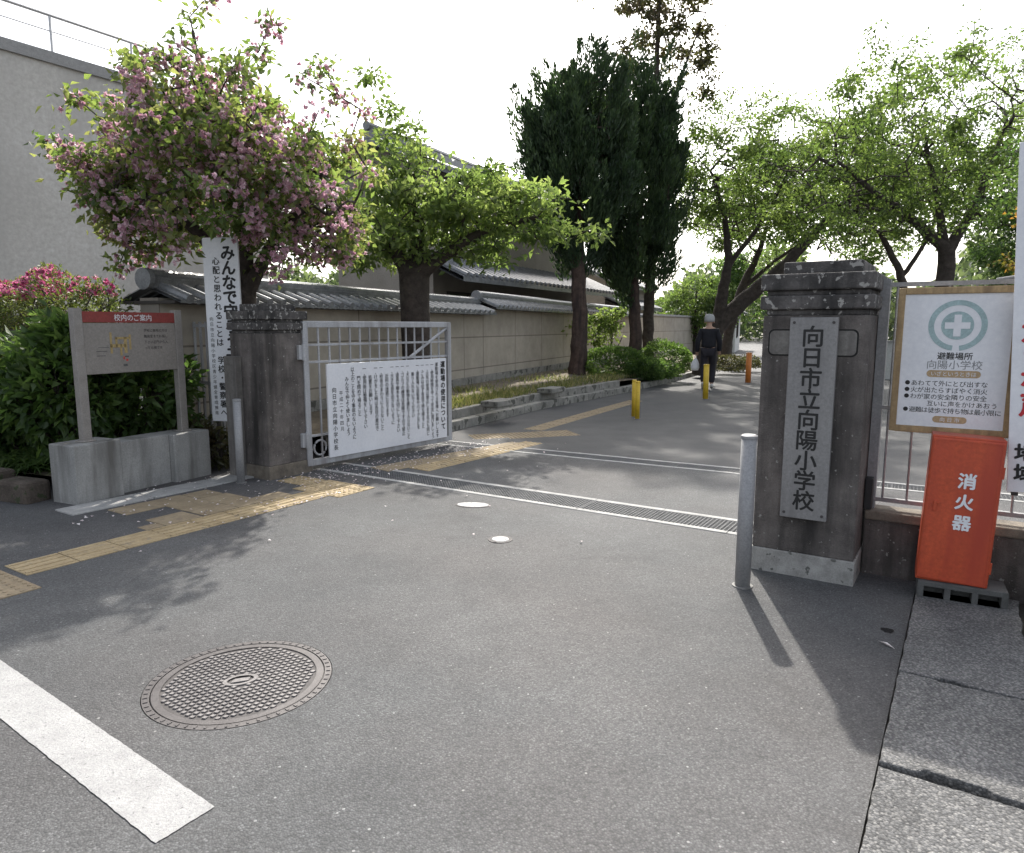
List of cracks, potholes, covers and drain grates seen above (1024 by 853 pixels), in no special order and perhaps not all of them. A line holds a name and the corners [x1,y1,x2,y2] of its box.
manhole cover [141,641,332,731]
drain grate [317,462,754,535]
utility cover [488,535,513,543]
